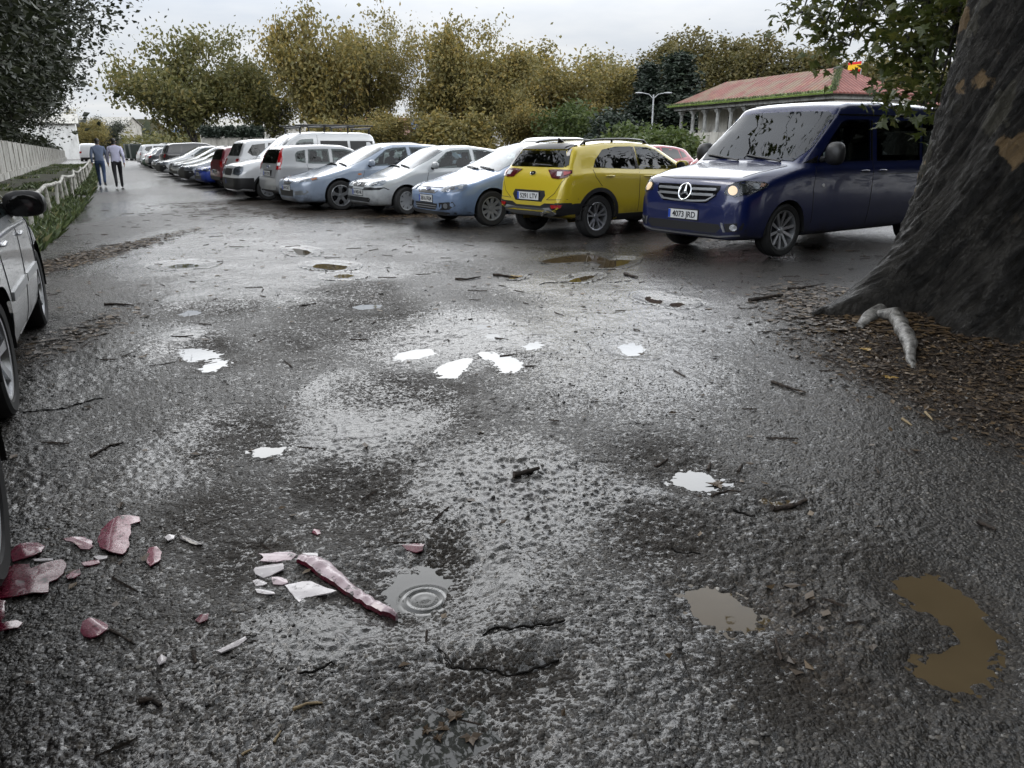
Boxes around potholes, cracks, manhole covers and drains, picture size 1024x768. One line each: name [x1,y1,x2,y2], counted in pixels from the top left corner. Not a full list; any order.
pothole [287,524,537,660]
pothole [146,260,219,271]
crack [438,648,559,677]
pothole [843,544,1024,733]
pothole [298,261,363,272]
pothole [530,251,642,269]
pothole [317,272,369,281]
crack [482,619,565,636]
